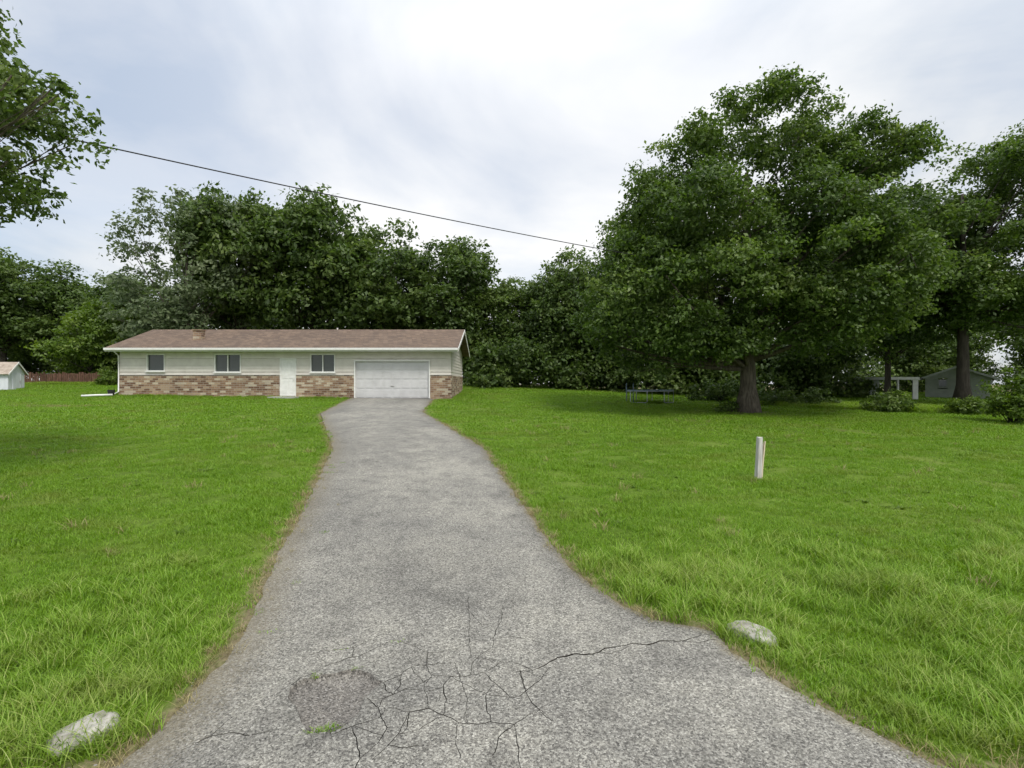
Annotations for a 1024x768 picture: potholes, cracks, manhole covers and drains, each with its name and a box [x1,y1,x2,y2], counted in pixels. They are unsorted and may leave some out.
crack [182,719,269,750]
pothole [288,669,382,734]
crack [290,633,391,686]
crack [336,597,715,768]
